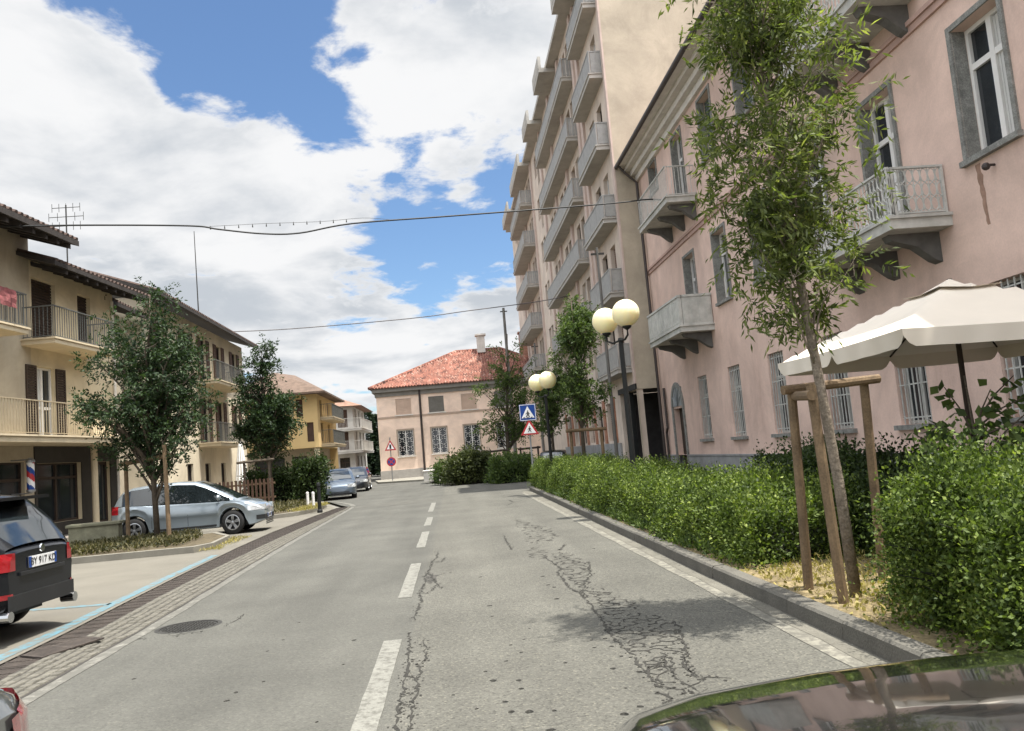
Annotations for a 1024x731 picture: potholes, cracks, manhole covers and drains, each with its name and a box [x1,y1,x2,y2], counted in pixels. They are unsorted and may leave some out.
crack [387,552,452,731]
crack [504,500,727,704]
manhole cover [154,619,222,634]
